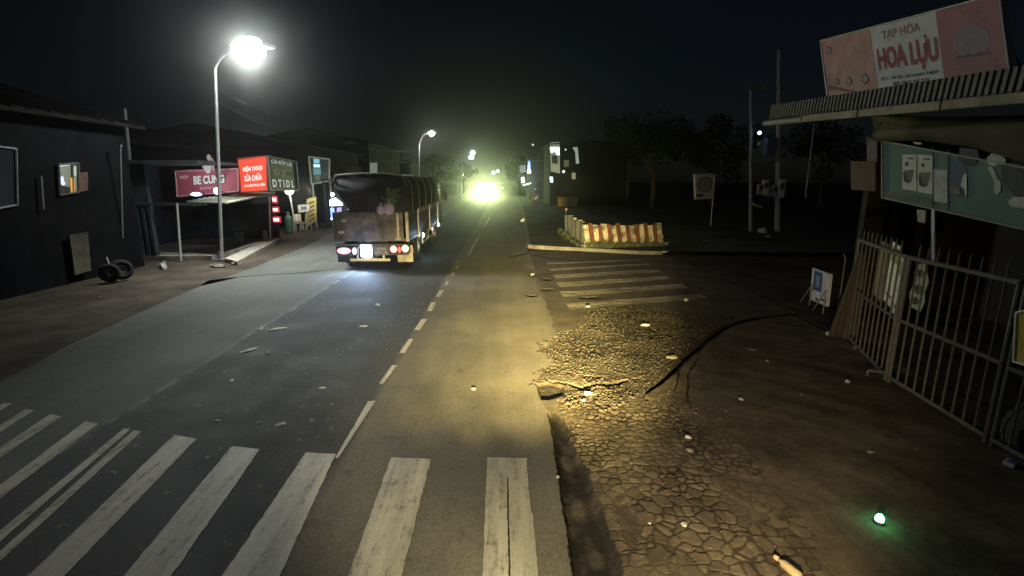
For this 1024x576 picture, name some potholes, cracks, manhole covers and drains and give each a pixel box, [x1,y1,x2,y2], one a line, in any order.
crack [550,313,830,576]
pothole [535,381,566,400]
